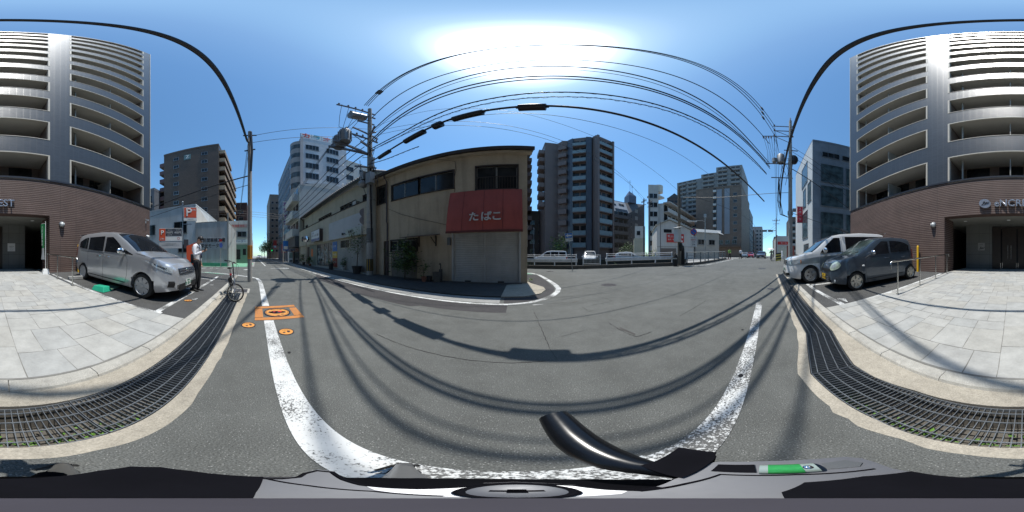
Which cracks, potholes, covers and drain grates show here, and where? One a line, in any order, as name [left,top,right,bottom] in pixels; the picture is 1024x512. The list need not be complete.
drain grate [790,299,812,312]
drain grate [812,365,918,417]
drain grate [69,357,202,434]
drain grate [201,308,234,329]
drain grate [806,331,853,375]
drain grate [216,299,238,309]
drain grate [795,311,831,334]
drain grate [167,326,224,366]
manhole cover [264,308,291,317]
